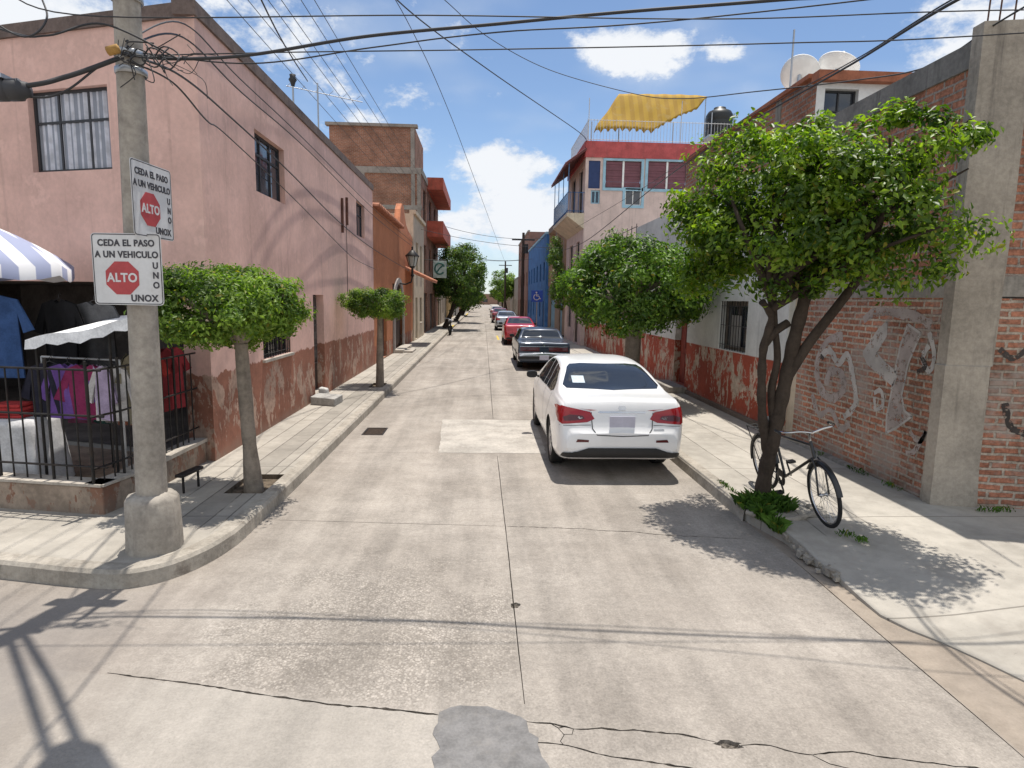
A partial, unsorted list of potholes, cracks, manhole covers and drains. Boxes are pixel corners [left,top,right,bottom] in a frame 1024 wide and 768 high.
crack [527,721,979,768]
